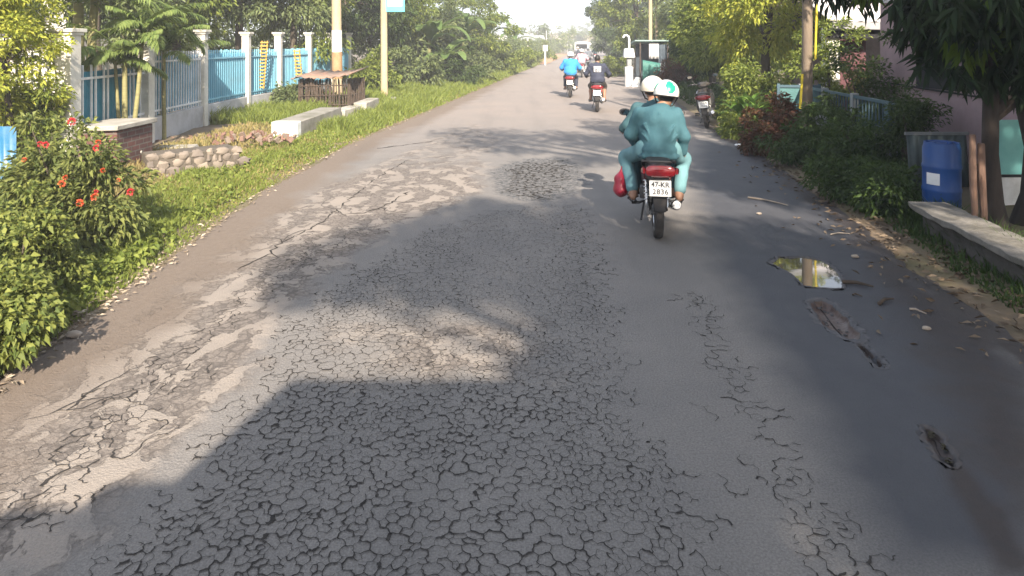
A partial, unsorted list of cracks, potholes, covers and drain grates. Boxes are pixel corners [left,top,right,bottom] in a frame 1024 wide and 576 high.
crack [89,205,733,576]
crack [667,293,896,576]
pothole [800,297,872,344]
pothole [852,341,891,370]
pothole [769,256,847,291]
pothole [918,423,962,470]
crack [237,141,432,270]
crack [0,223,387,532]
